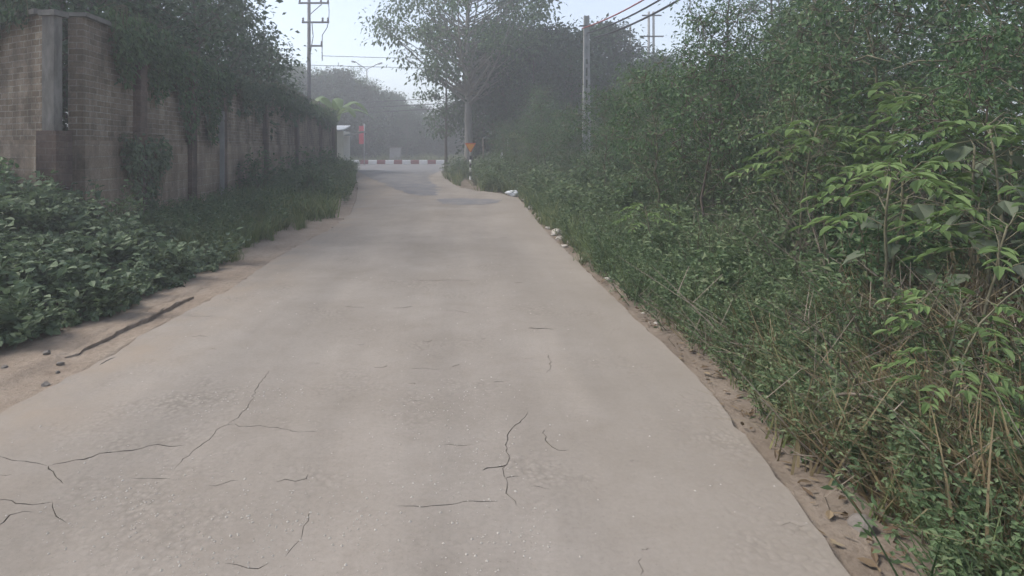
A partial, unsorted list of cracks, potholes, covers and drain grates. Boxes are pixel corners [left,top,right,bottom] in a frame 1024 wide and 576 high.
crack [2,373,315,483]
crack [416,414,565,507]
crack [1,499,65,524]
